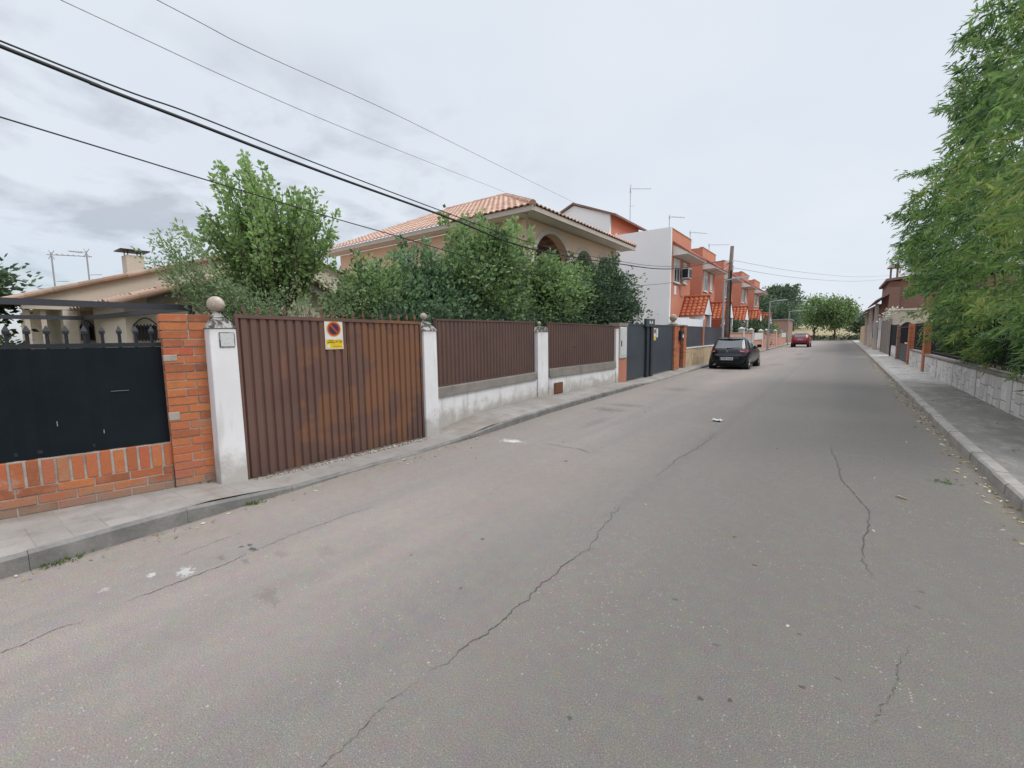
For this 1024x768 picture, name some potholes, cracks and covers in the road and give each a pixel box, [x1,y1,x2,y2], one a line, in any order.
crack [831,453,875,579]
crack [320,506,620,767]
crack [0,510,361,653]
